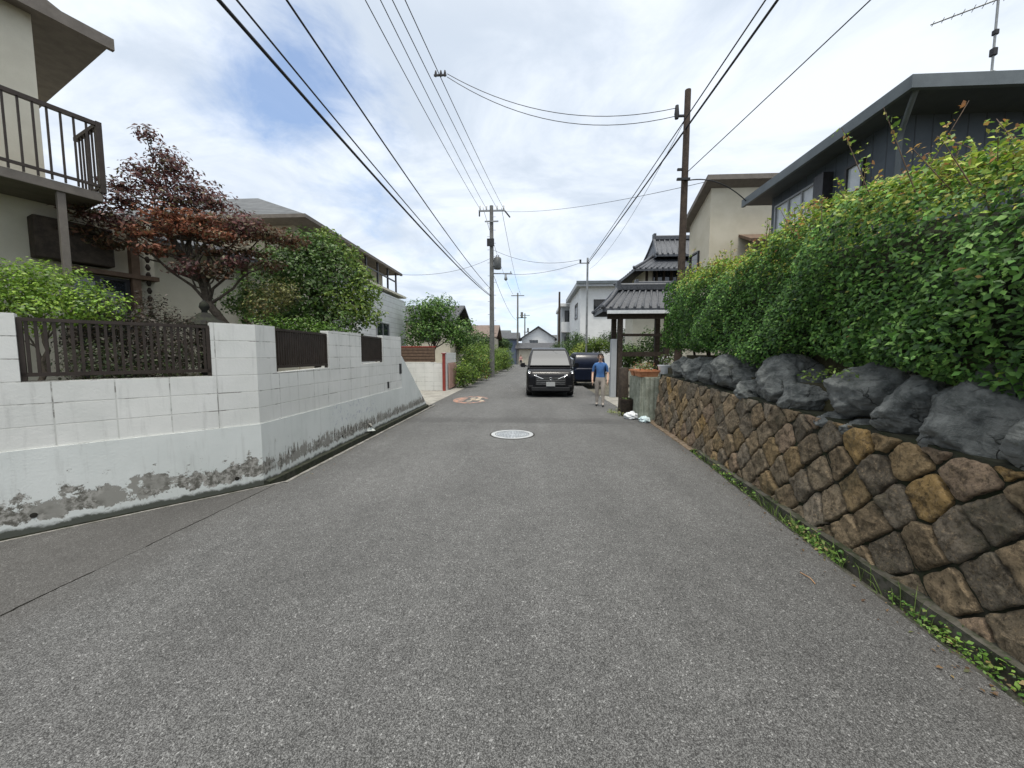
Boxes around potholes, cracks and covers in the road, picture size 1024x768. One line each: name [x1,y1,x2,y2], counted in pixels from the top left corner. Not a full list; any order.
manhole cover [490,430,535,439]
